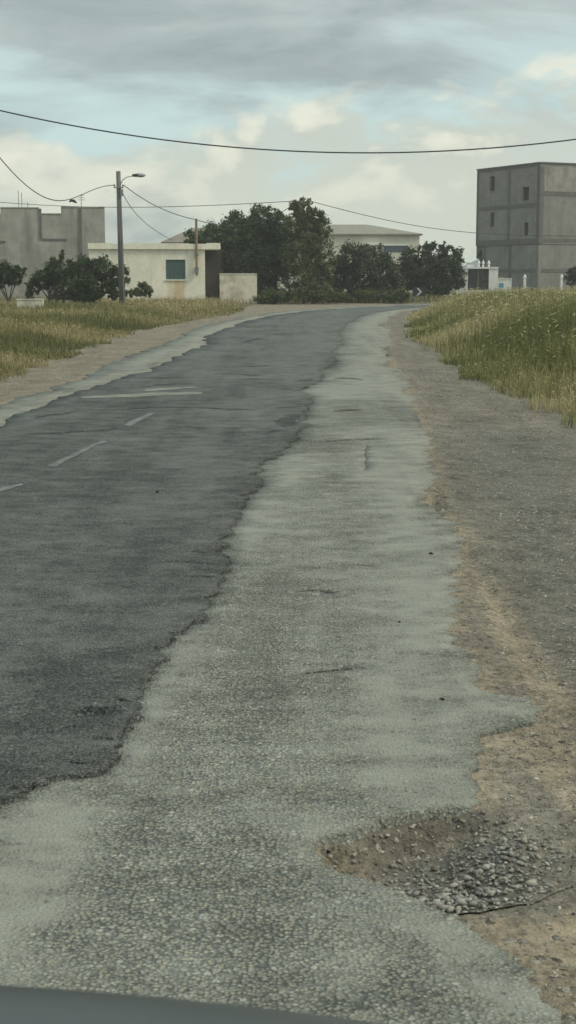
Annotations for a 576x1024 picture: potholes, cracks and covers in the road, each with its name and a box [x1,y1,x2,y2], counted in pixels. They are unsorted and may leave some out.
pothole [315,810,572,915]
crack [320,438,379,470]
